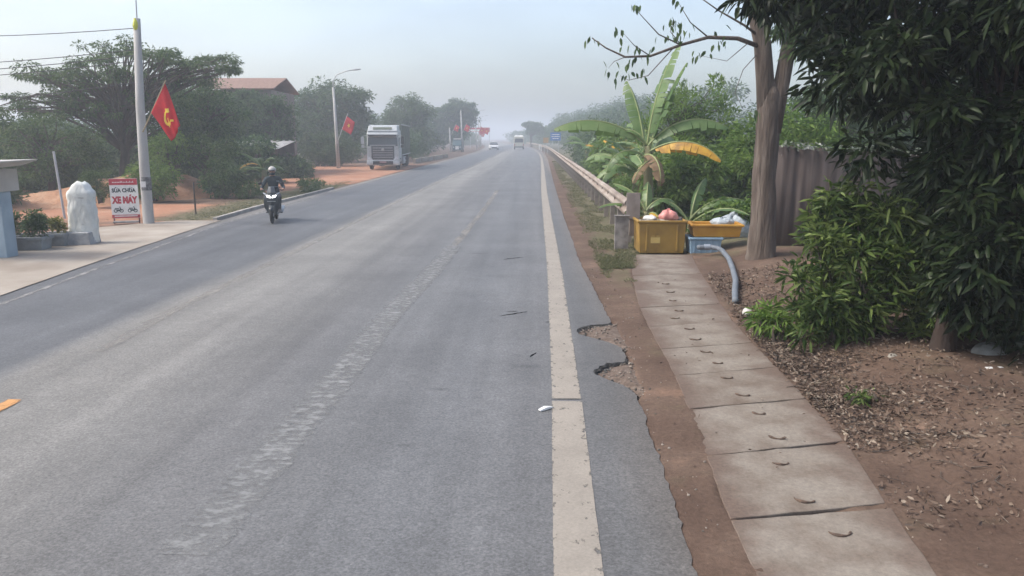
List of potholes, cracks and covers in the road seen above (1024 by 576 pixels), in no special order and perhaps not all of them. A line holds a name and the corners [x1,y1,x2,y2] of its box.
pothole [593,358,650,400]
pothole [577,323,628,353]
